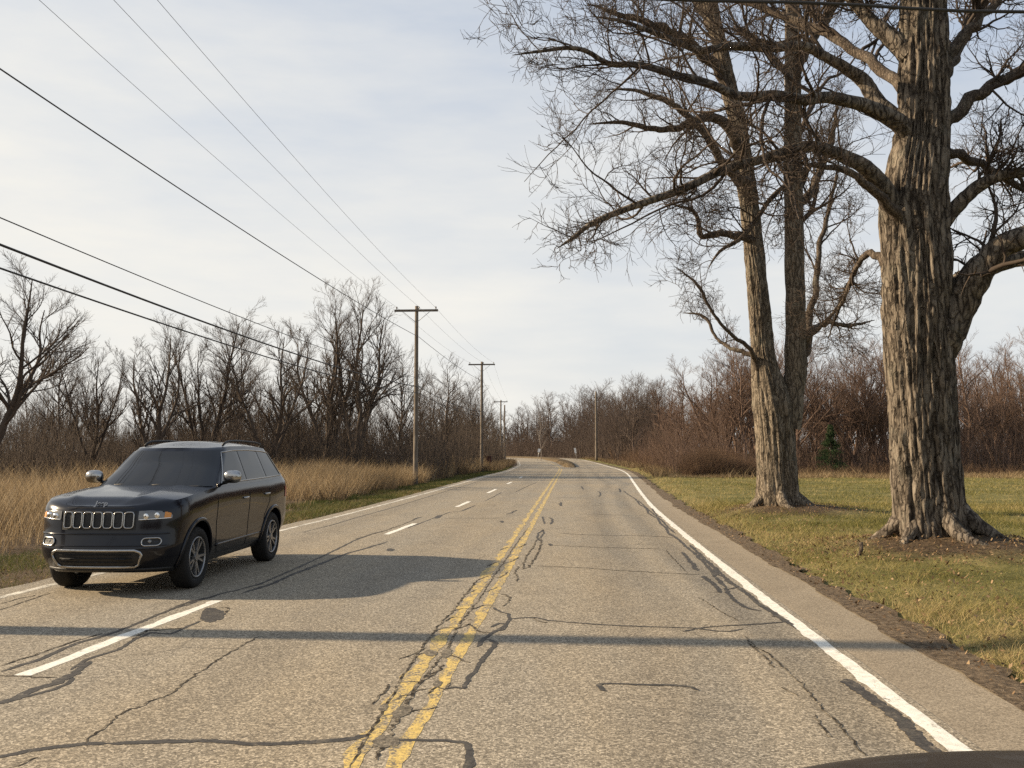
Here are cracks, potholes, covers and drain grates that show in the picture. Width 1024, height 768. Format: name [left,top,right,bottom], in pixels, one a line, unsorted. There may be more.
crack [685,597,866,755]
crack [349,501,697,768]
crack [85,637,256,744]
